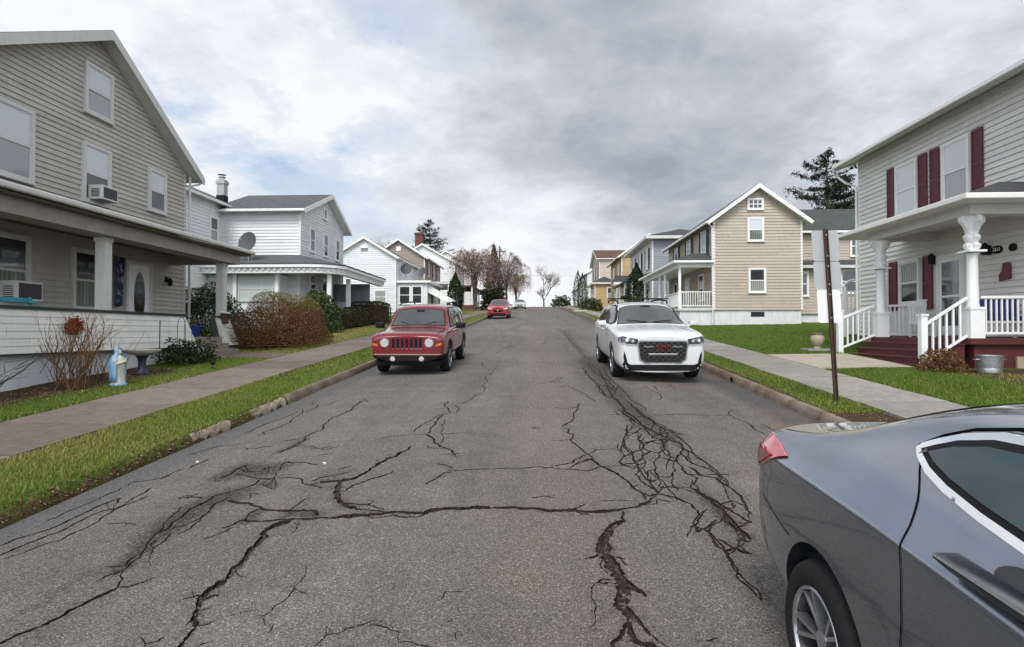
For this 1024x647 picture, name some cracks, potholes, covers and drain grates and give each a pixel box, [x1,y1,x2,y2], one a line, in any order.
crack [0,331,774,647]
